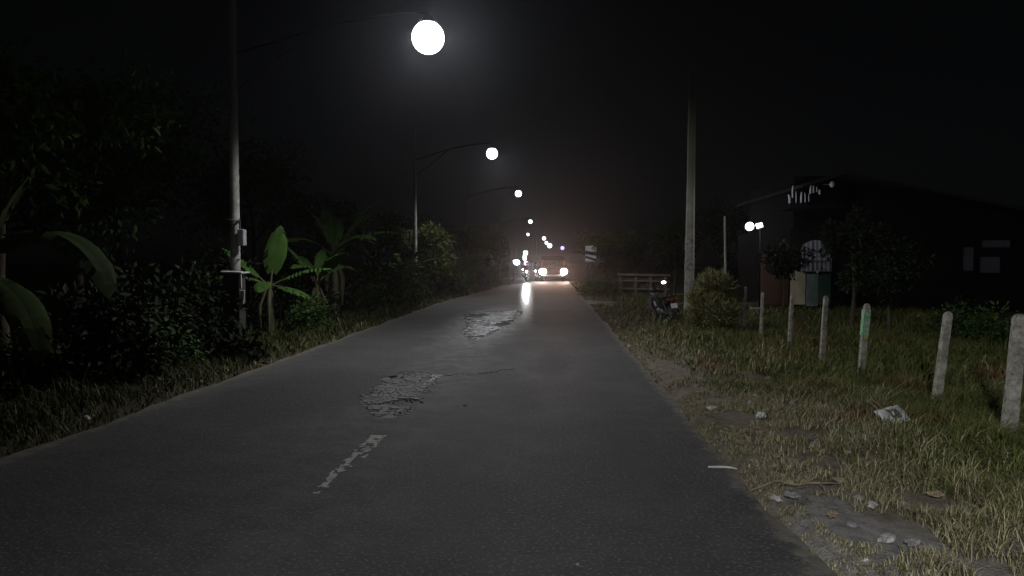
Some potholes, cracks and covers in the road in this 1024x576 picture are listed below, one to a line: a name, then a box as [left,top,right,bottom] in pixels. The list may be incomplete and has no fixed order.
crack [359,368,515,419]
pothole [386,399,423,408]
